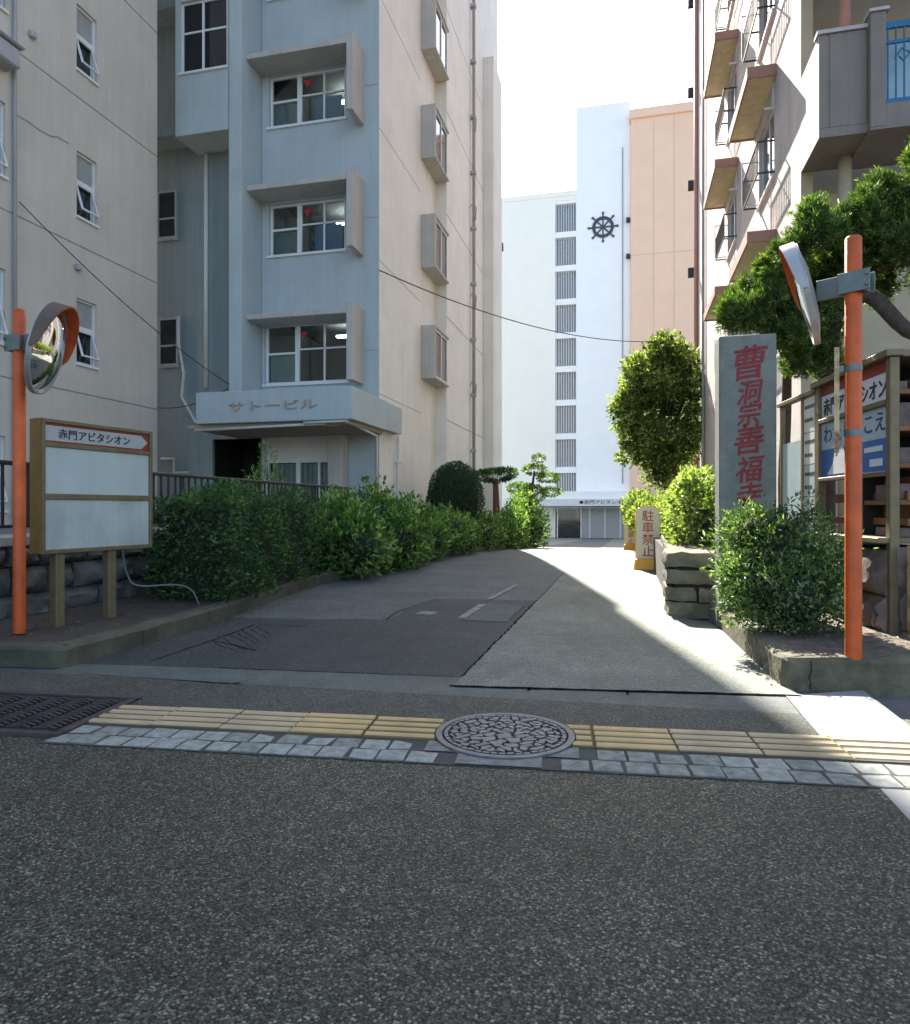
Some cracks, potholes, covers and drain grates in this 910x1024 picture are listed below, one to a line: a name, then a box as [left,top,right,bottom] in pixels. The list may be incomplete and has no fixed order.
manhole cover [424,713,580,768]
